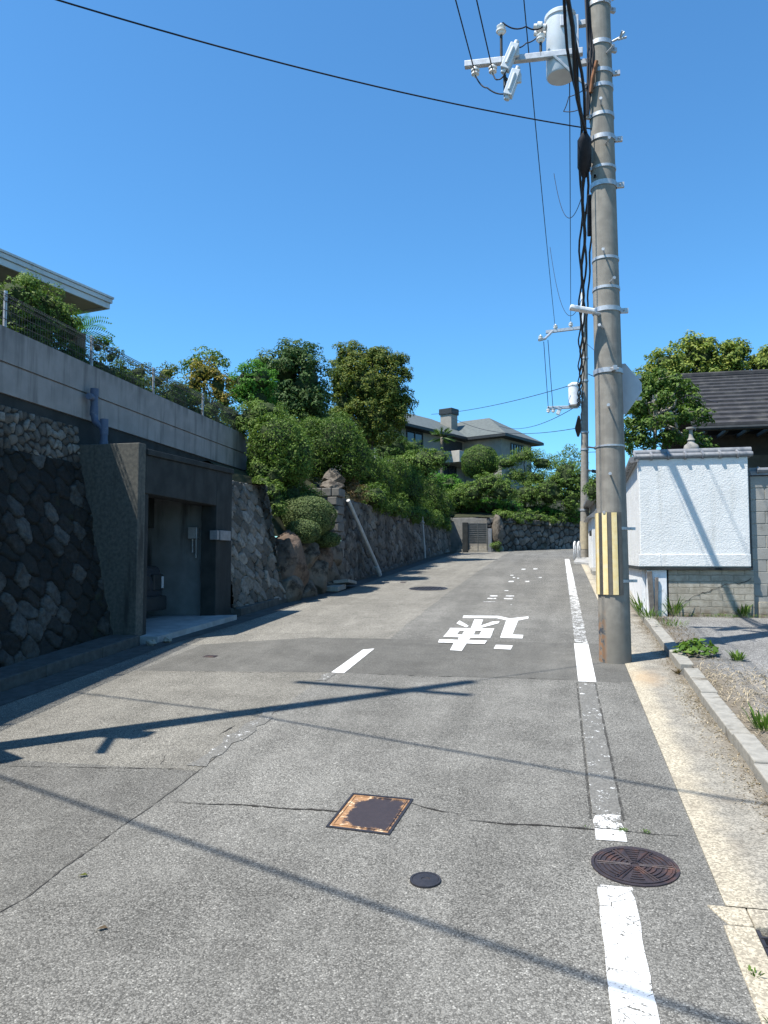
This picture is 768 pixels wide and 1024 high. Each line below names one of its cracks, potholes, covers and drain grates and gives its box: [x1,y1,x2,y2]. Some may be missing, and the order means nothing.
manhole cover [326,793,414,836]
utility cover [410,872,441,889]
crack [172,801,341,812]
crack [408,802,678,836]
manhole cover [591,846,680,887]
